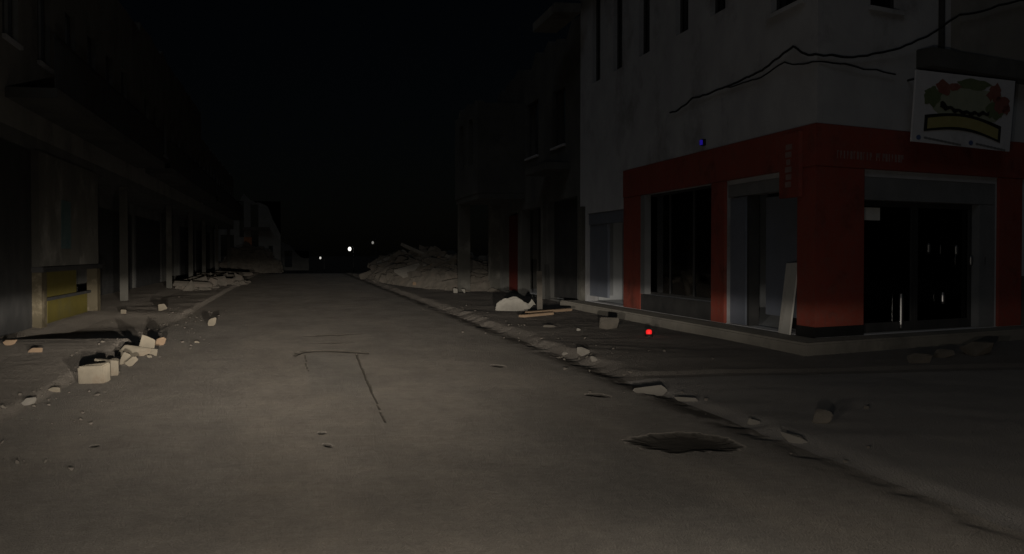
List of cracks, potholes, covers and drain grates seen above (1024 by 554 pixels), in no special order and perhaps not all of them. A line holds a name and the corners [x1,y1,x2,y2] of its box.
crack [293,333,387,423]
pothole [622,431,746,454]
